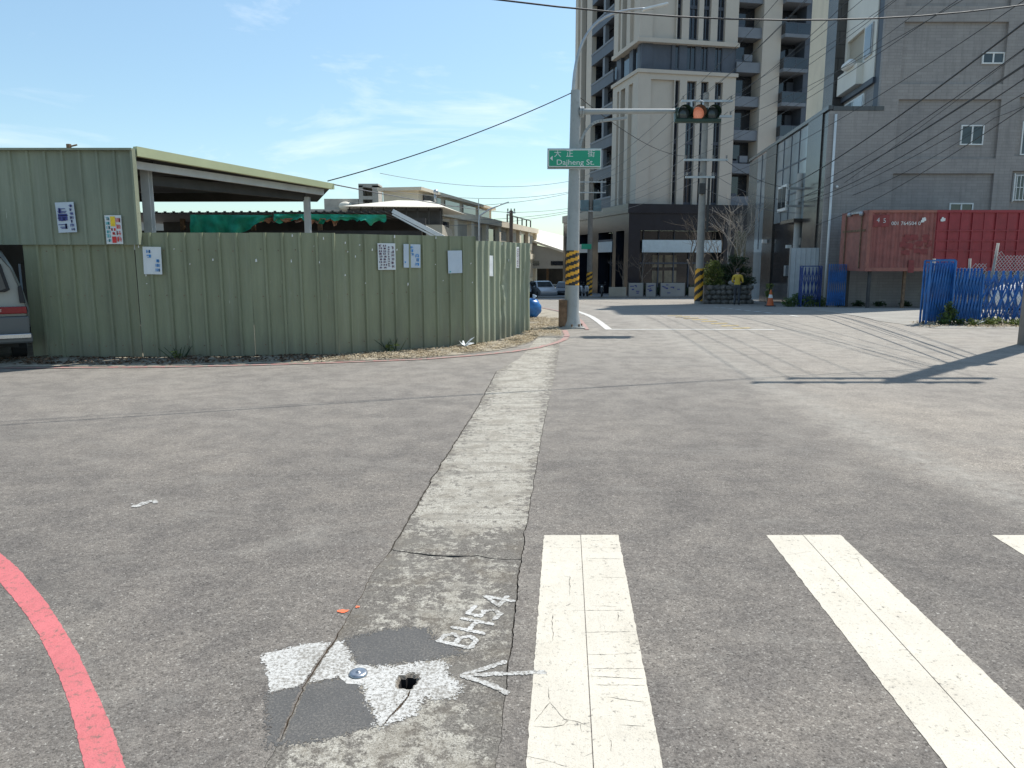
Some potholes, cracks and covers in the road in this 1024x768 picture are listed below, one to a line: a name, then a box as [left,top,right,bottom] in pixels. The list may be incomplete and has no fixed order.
crack [283,370,498,734]
crack [588,653,645,679]
pothole [396,673,420,690]
crack [502,401,549,726]
